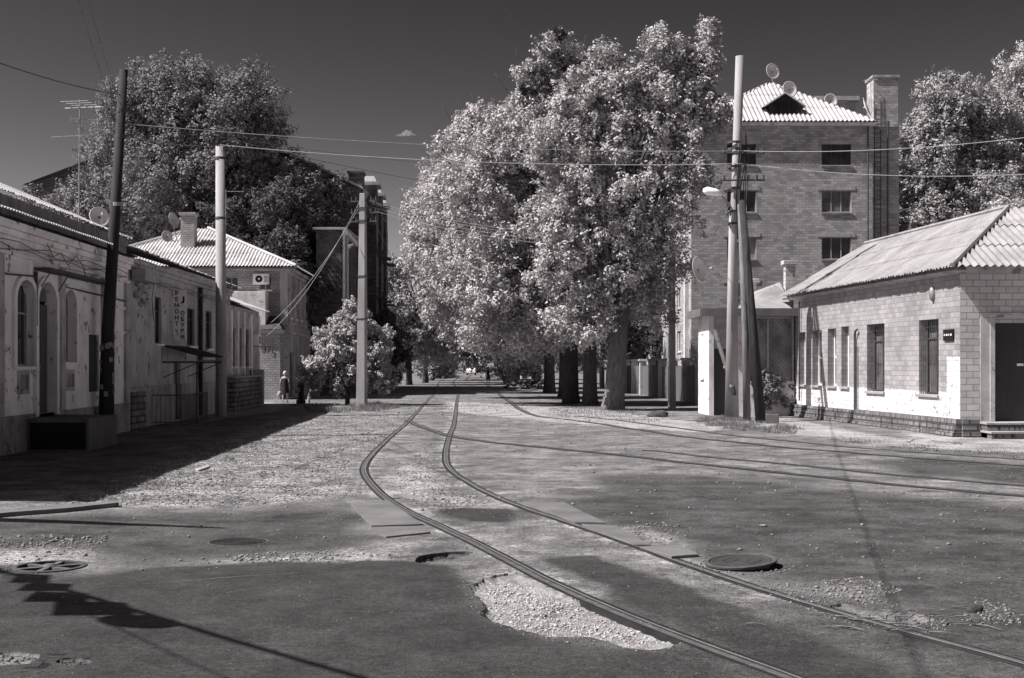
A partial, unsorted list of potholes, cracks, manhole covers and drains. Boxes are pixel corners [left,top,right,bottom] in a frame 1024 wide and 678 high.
manhole cover [674,553,796,576]
pothole [56,657,92,666]
pothole [415,551,473,563]
manhole cover [207,537,270,546]
pothole [469,573,681,650]
pothole [0,652,40,665]
